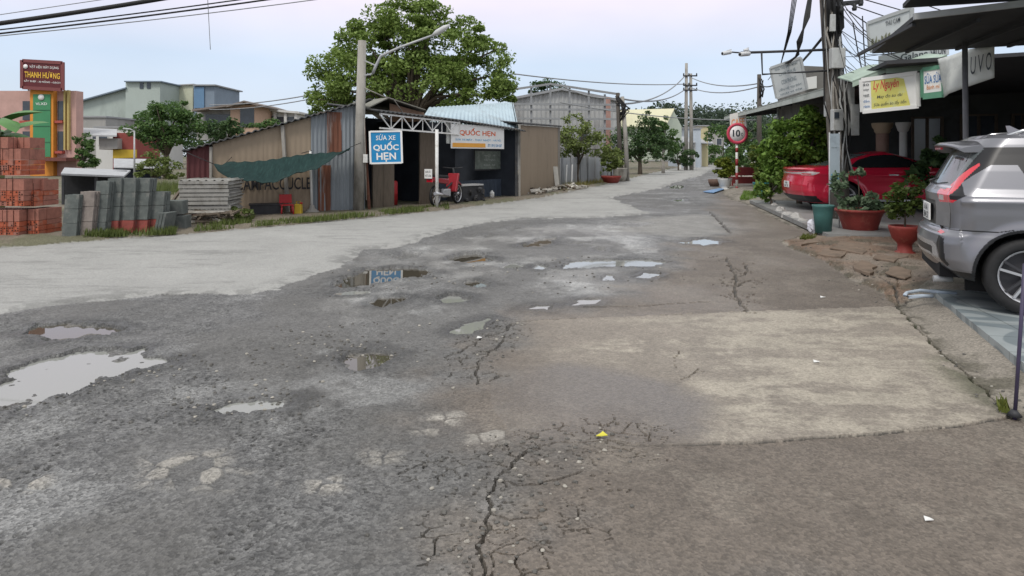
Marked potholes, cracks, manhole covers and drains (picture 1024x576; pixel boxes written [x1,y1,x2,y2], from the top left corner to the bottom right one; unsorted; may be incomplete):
crack [442,319,532,393]
pothole [516,236,557,247]
pothole [441,250,489,263]
pothole [335,349,400,370]
pothole [0,345,181,415]
pothole [445,317,493,334]
pothole [209,394,300,414]
pothole [330,265,436,287]
crack [583,255,768,314]
pothole [366,294,414,307]
pothole [570,296,604,305]
